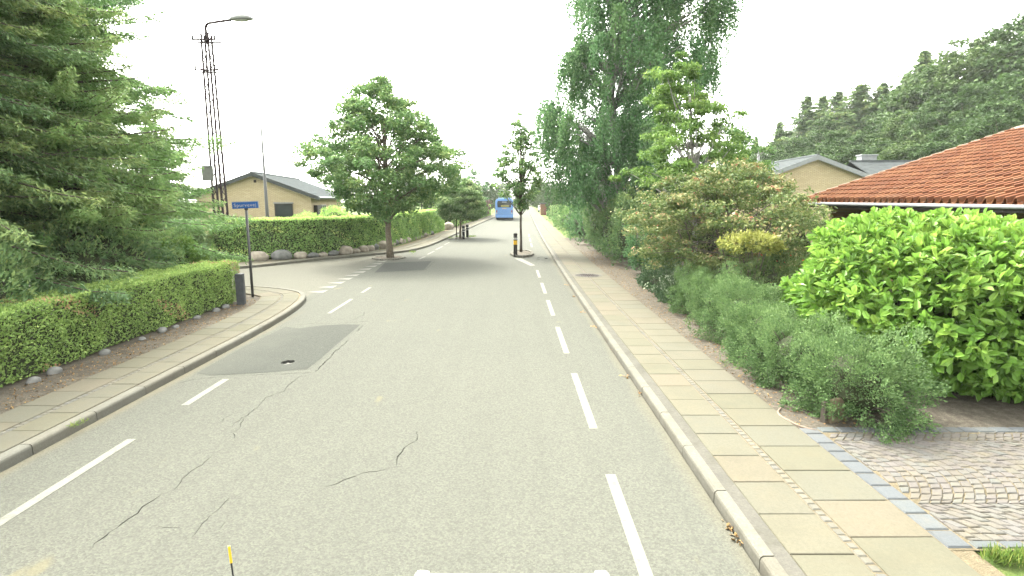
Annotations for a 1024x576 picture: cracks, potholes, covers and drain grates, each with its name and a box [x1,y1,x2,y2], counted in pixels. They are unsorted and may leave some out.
crack [324,432,418,487]
crack [92,455,213,548]
